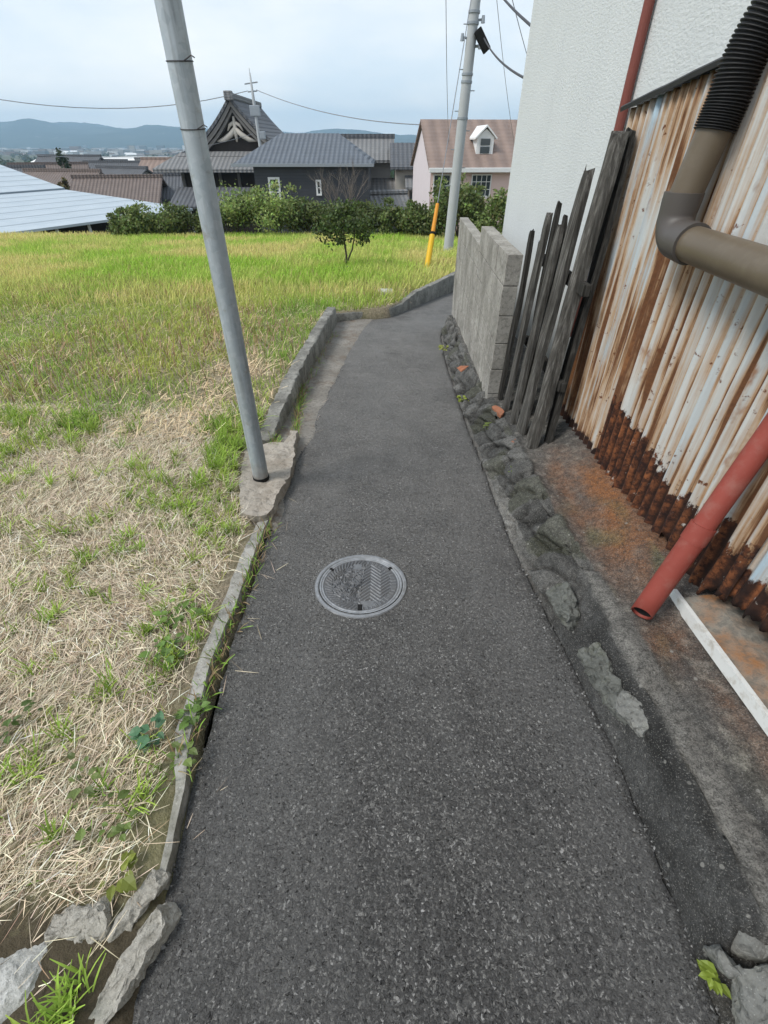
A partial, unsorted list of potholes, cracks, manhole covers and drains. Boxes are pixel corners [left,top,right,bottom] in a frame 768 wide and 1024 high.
manhole cover [315,555,407,618]
